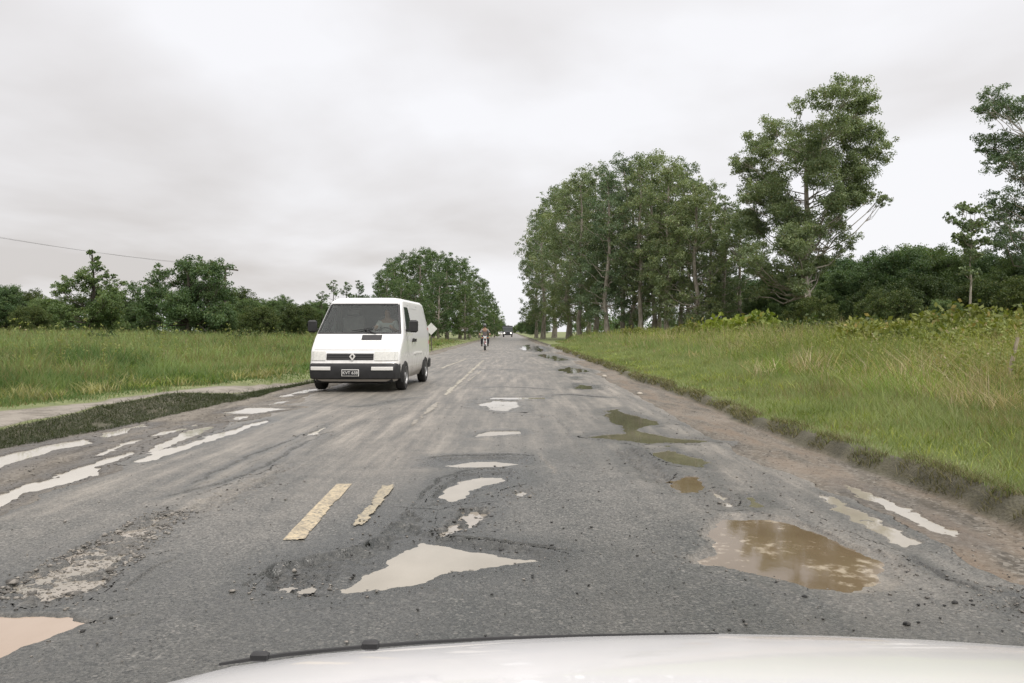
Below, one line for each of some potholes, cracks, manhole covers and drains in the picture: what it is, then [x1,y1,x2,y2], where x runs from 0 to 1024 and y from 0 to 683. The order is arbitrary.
pothole [434,501,518,537]
pothole [646,508,944,607]
pothole [408,455,537,470]
pothole [419,470,539,510]
pothole [218,509,585,613]
pothole [646,447,730,471]
pothole [651,471,736,498]
pothole [461,399,539,414]
pothole [524,345,563,353]
pothole [0,505,209,609]
